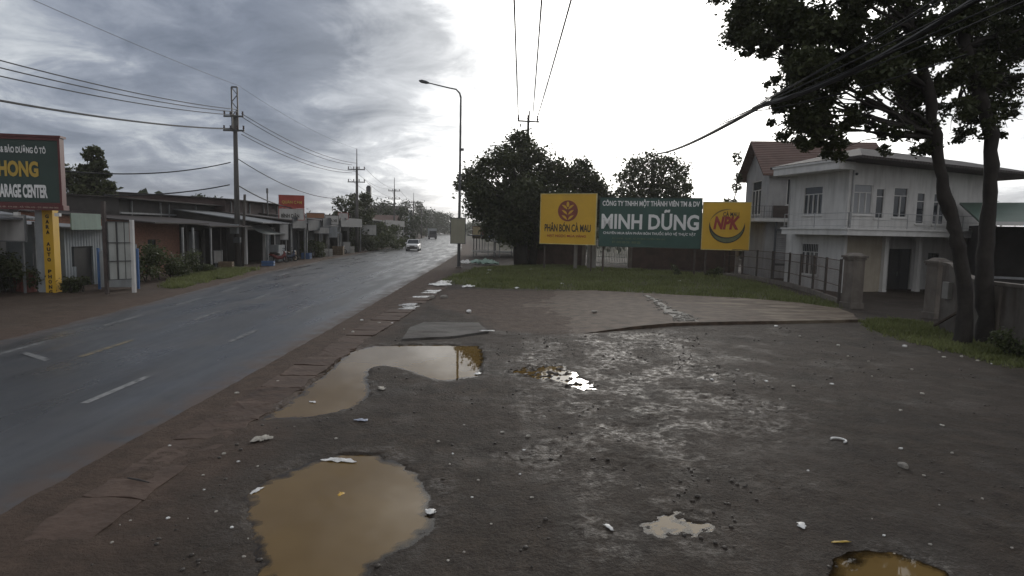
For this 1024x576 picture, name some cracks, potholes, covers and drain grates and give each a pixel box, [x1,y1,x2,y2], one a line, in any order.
pothole [495,362,618,397]
pothole [781,533,983,576]
pothole [212,445,465,576]
pothole [243,342,499,425]
pothole [612,495,738,556]
